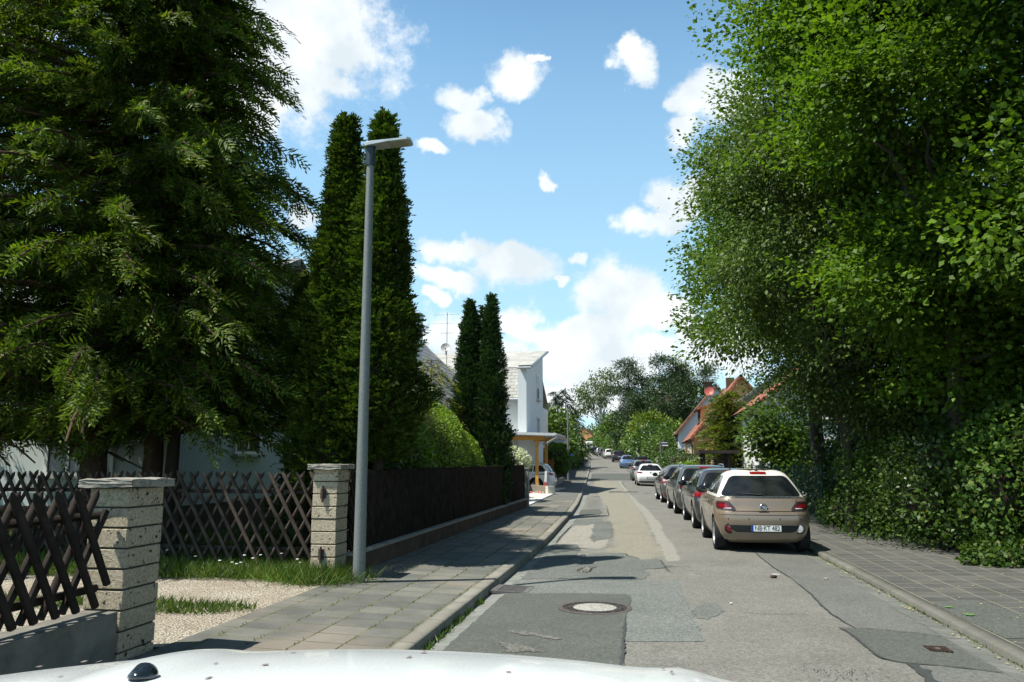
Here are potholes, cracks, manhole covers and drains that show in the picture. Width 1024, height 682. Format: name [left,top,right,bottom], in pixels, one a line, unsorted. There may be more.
utility cover [923,645,953,653]
manhole cover [558,601,632,615]
drain grate [489,584,536,594]
